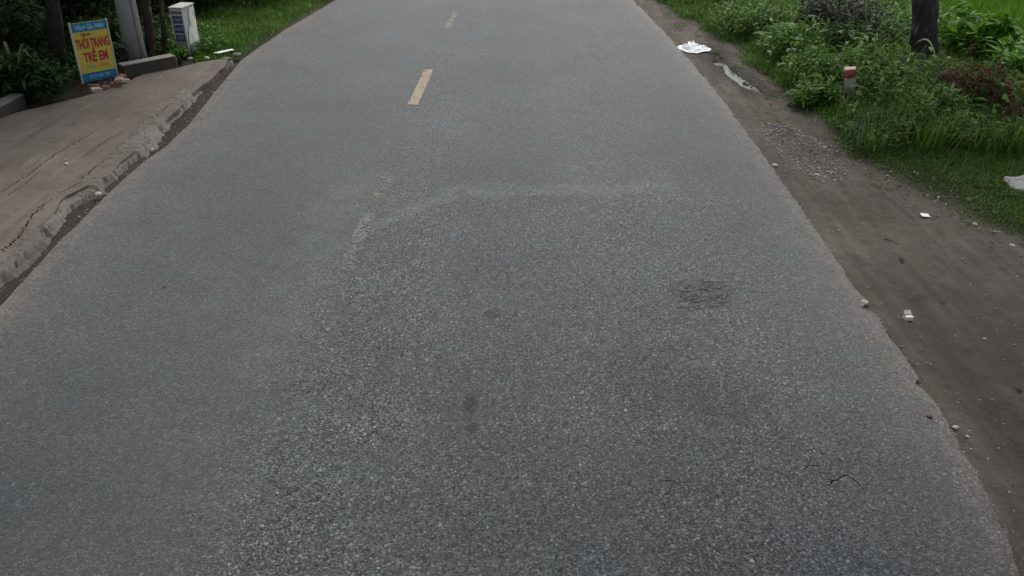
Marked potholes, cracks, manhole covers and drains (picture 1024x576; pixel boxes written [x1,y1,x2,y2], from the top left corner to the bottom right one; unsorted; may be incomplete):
crack [805,465,863,489]
